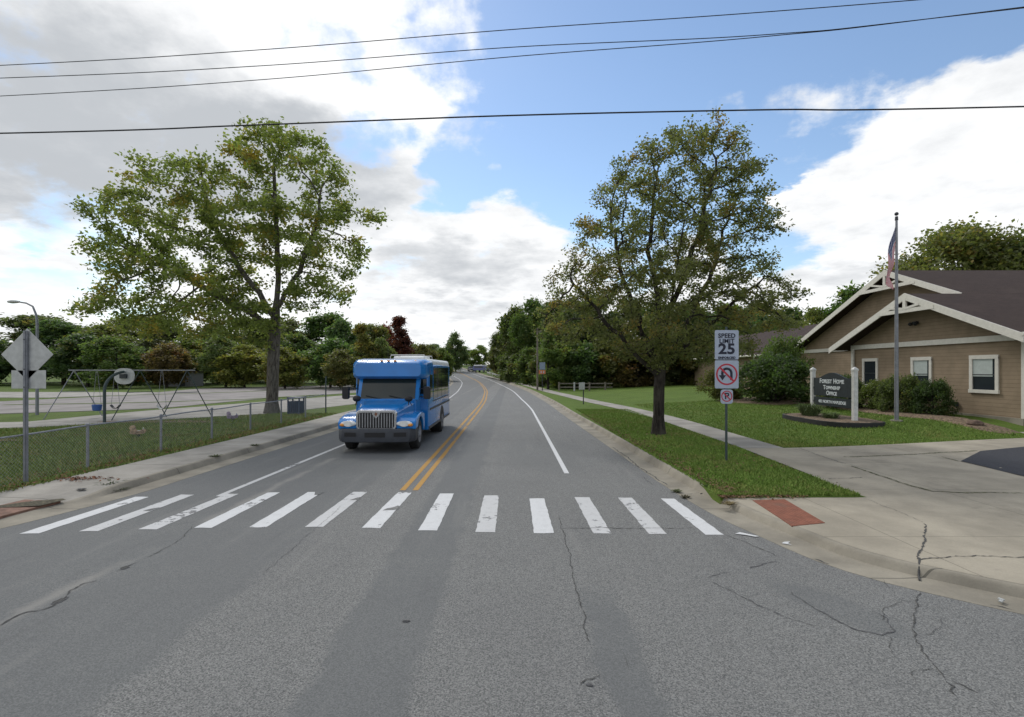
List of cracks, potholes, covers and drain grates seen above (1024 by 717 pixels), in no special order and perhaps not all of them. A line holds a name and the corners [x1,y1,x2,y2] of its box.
crack [1,580,96,625]
crack [791,524,1009,696]
crack [559,518,692,640]
